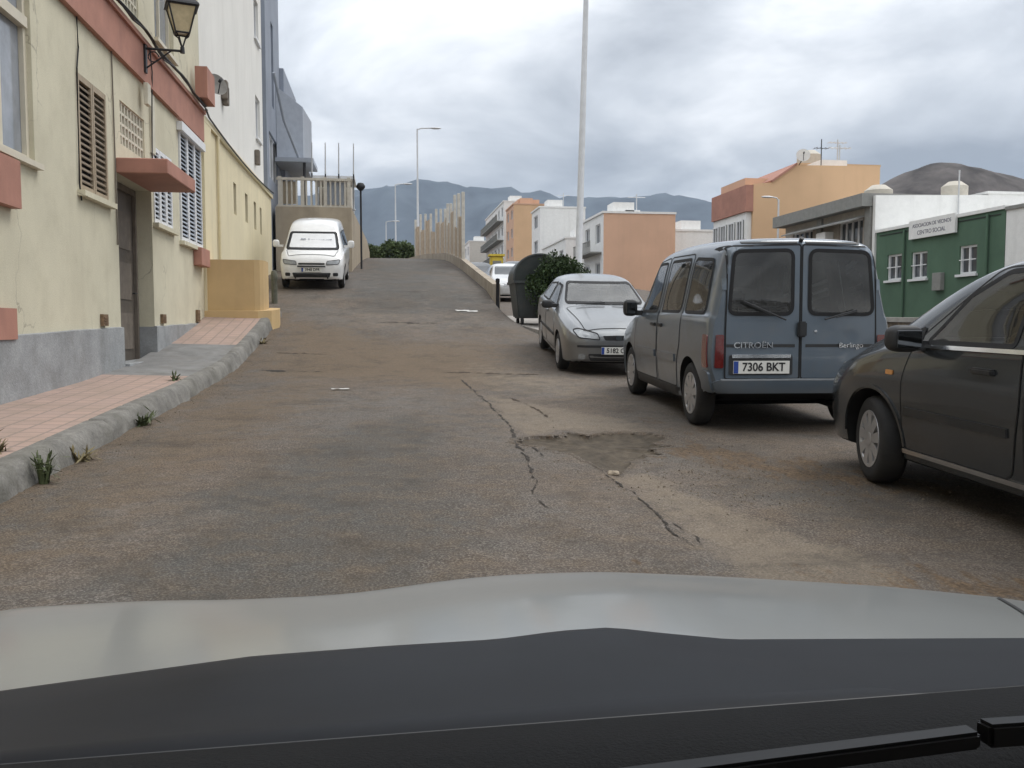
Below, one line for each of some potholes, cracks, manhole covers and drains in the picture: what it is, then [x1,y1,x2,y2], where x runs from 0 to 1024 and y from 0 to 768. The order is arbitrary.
crack [602,470,700,549]
crack [450,372,554,511]
pothole [505,431,684,477]
